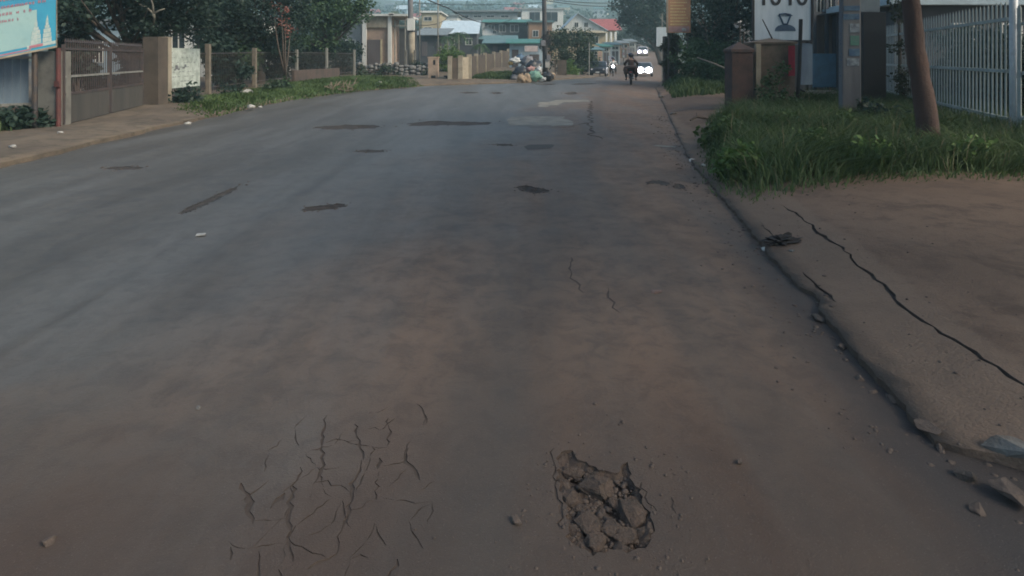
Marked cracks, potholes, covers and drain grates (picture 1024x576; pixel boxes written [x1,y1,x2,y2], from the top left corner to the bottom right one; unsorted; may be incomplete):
crack [230,404,435,576]
crack [803,273,836,302]
pothole [556,450,655,555]
